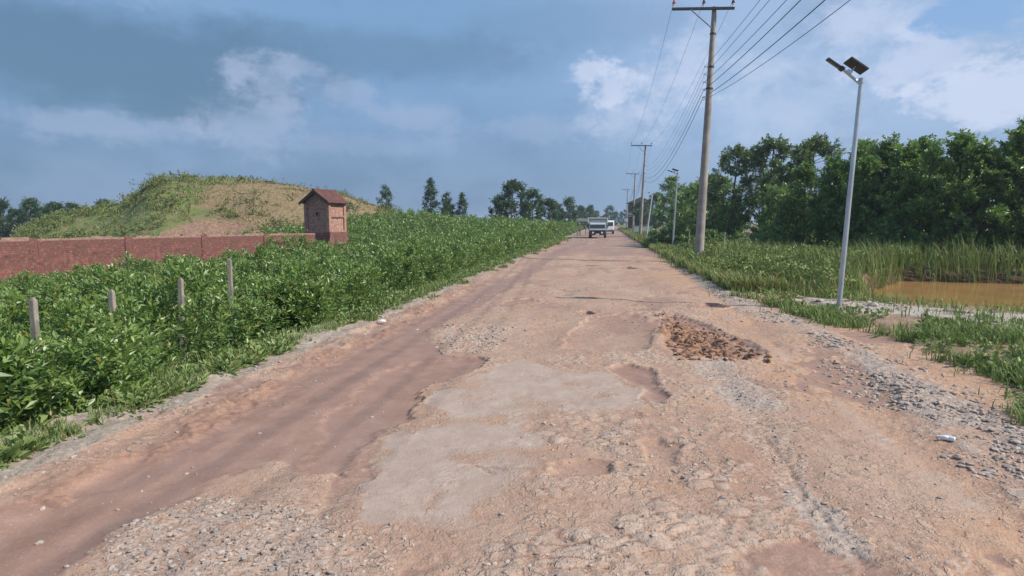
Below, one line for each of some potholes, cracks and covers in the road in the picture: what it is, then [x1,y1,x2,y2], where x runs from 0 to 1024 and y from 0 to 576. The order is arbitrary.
pothole [655,312,768,358]
pothole [605,361,672,404]
